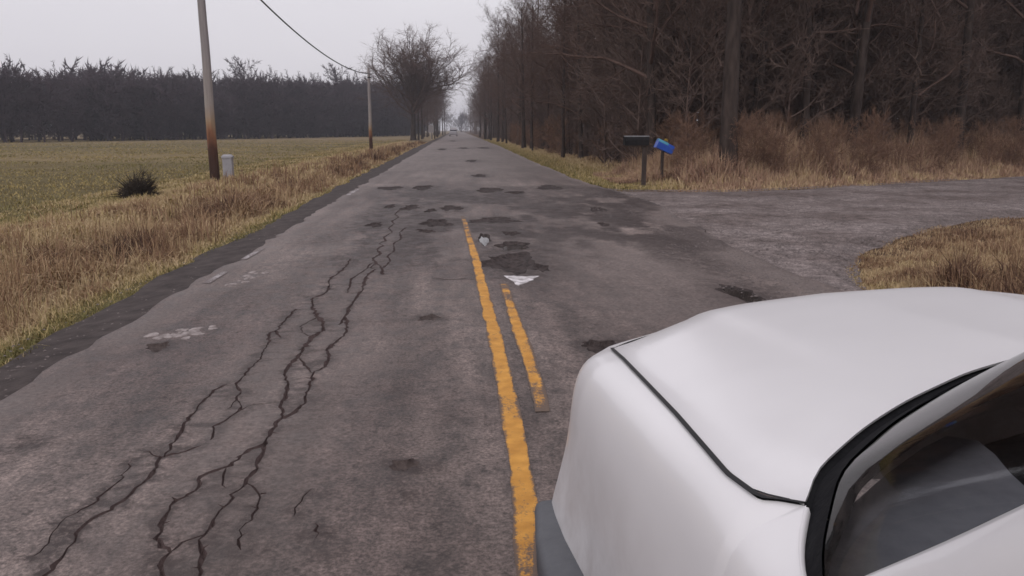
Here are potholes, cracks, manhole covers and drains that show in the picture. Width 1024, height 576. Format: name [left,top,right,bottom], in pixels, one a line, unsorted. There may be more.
pothole [389,458,419,471]
pothole [481,251,536,275]
pothole [419,219,454,227]
pothole [715,284,766,303]
pothole [146,341,170,352]
pothole [581,339,616,353]
crack [34,210,406,576]
